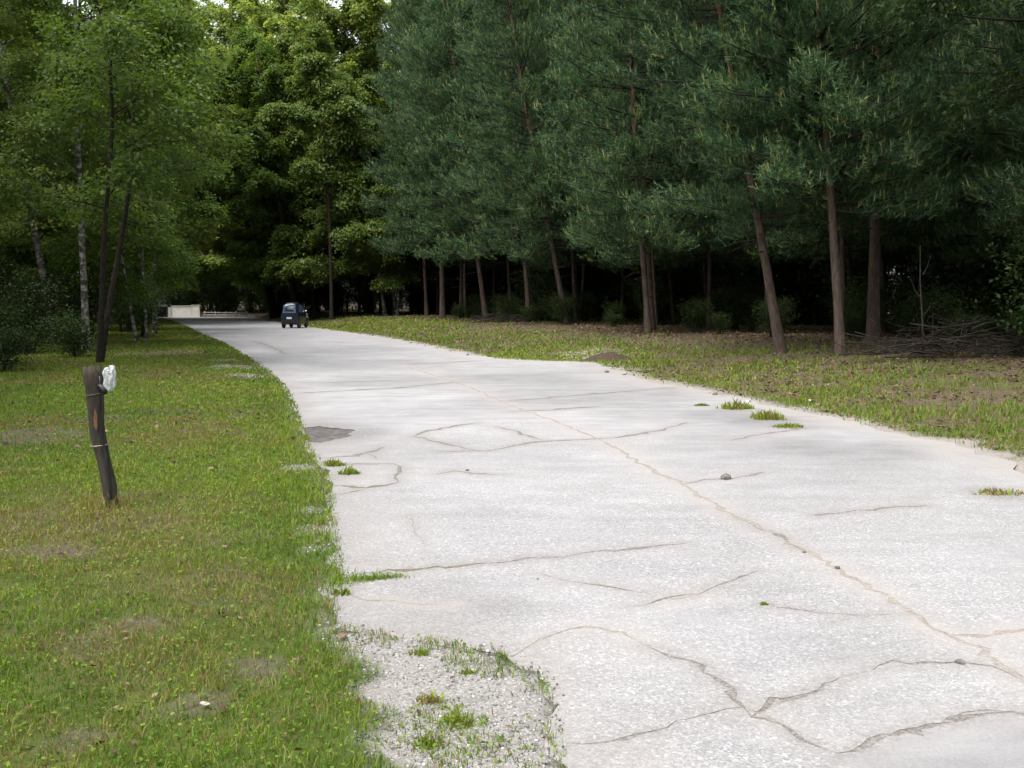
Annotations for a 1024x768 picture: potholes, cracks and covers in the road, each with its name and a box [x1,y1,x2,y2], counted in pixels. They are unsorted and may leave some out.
crack [514,626,1024,754]
crack [378,544,677,573]
crack [332,447,402,493]
crack [412,423,685,452]
crack [349,594,434,605]
crack [584,572,754,605]
